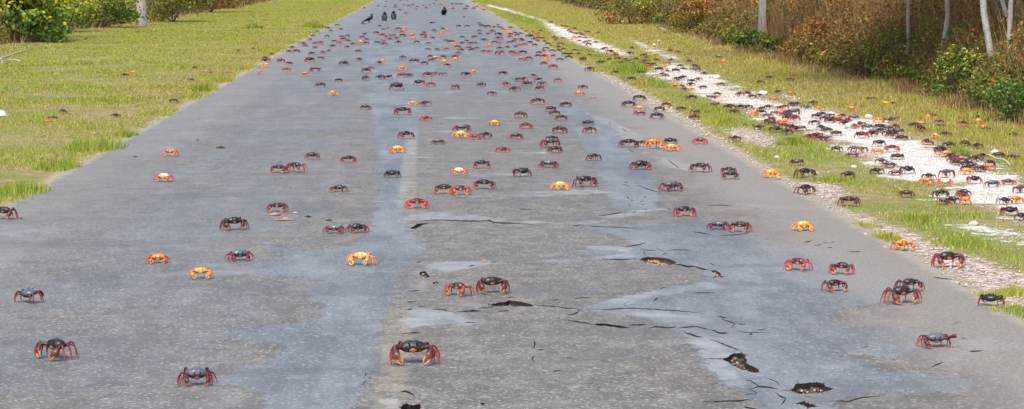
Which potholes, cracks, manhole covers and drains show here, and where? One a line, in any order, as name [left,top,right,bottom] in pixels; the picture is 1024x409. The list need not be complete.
pothole [637,256,676,266]
crack [704,378,786,409]
crack [572,182,748,271]
crack [538,287,768,359]
crack [424,209,531,224]
pothole [789,381,836,394]
pothole [719,352,760,373]
